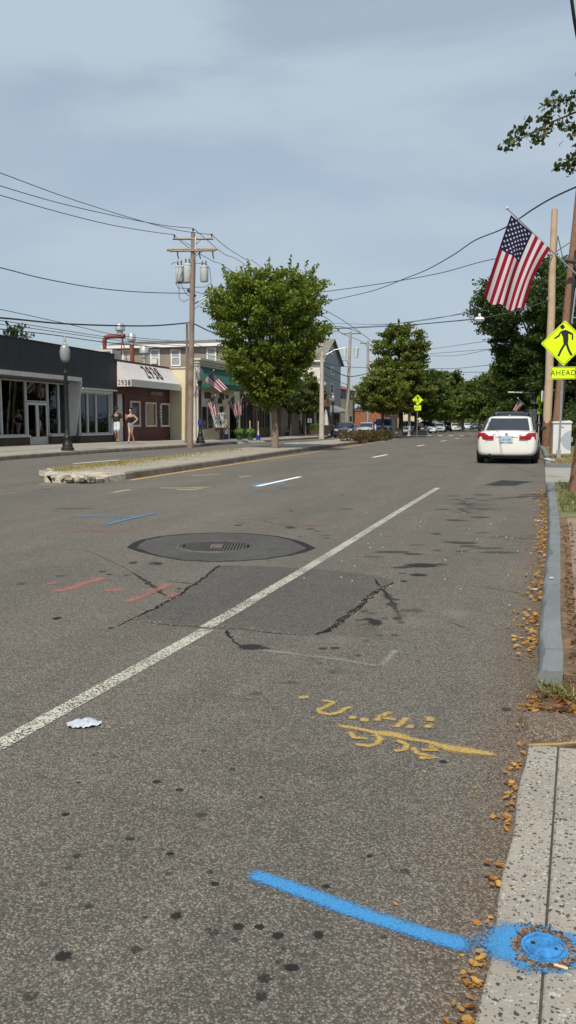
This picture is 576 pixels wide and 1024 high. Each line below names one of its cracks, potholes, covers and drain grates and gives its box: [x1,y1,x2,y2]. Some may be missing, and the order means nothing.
crack [82,549,394,646]
utility cover [520,933,568,963]
